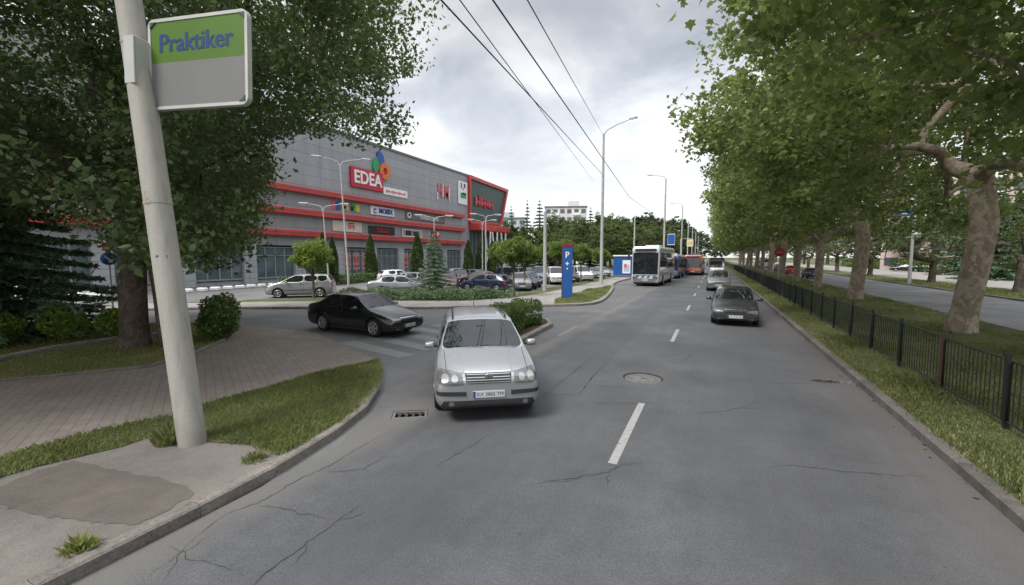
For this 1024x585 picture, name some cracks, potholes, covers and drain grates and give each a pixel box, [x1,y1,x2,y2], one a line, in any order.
manhole cover [623,372,664,384]
crack [769,465,913,476]
crack [542,462,651,485]
drain grate [392,410,428,418]
